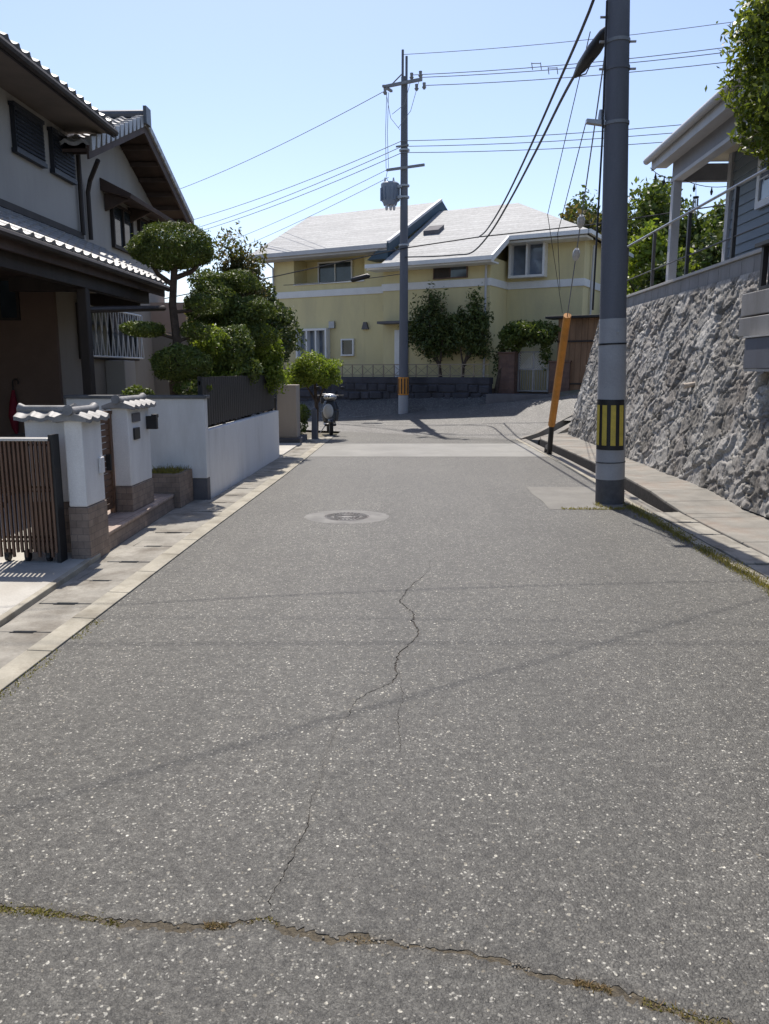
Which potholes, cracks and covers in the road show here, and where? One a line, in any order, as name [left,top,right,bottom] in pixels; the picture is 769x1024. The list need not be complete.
crack [0,559,733,1024]
manhole cover [304,510,389,524]
